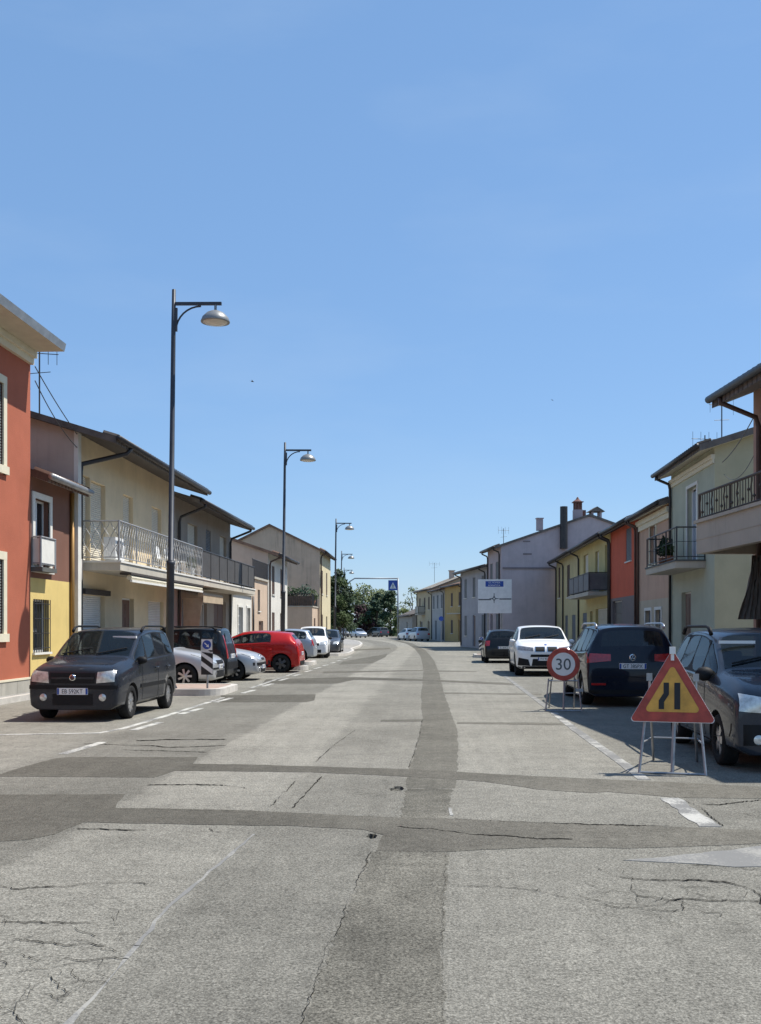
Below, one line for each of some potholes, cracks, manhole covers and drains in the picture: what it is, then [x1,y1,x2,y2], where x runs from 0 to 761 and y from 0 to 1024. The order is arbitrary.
crack [0,911,156,1024]
crack [457,864,761,931]
